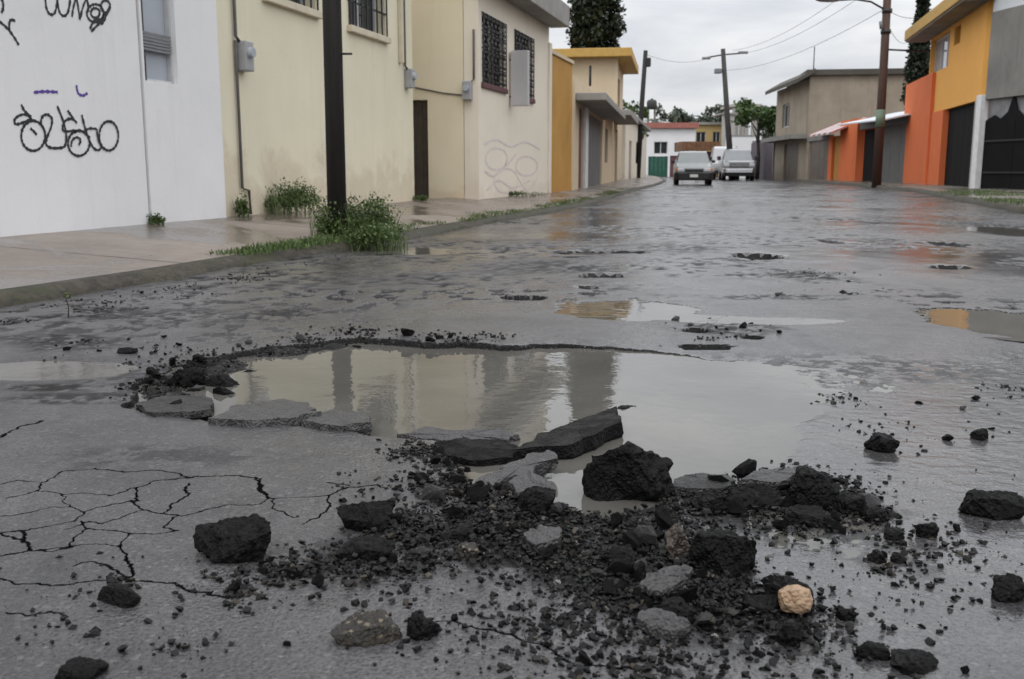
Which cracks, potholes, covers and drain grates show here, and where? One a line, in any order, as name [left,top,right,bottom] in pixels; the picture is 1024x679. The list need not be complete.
crack [0,420,45,438]
pothole [121,336,765,504]
crack [0,468,389,618]
